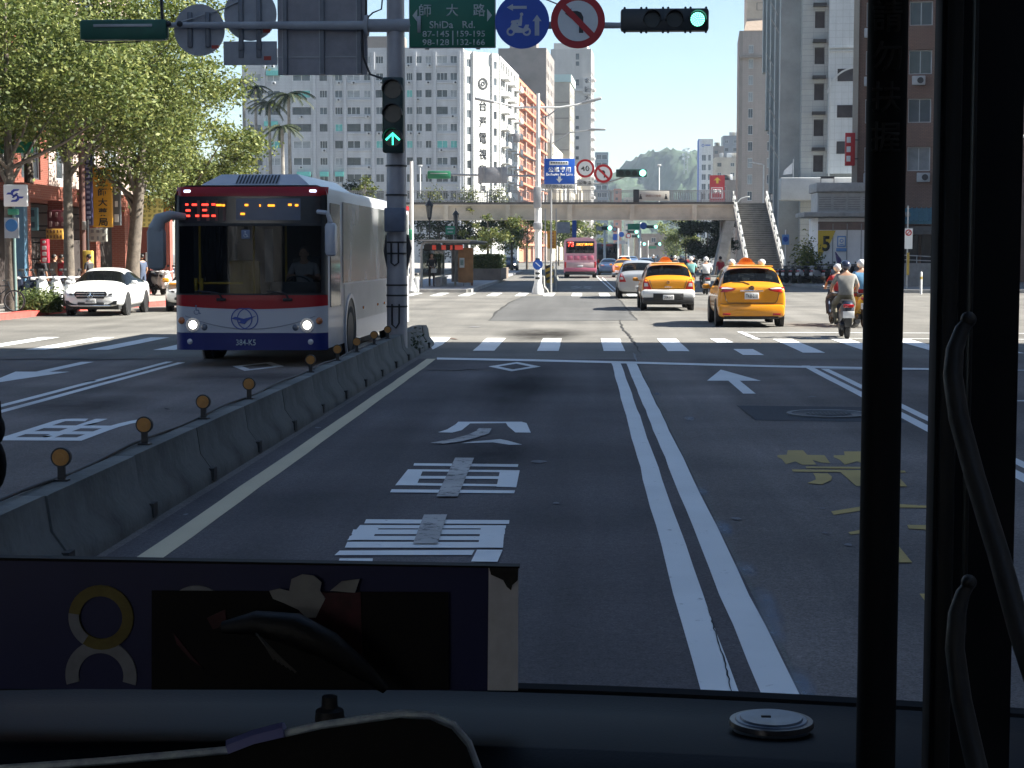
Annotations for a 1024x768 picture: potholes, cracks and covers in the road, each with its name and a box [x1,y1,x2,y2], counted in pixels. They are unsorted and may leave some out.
crack [708,610,732,691]
crack [620,320,641,361]
manhole cover [787,409,861,418]
